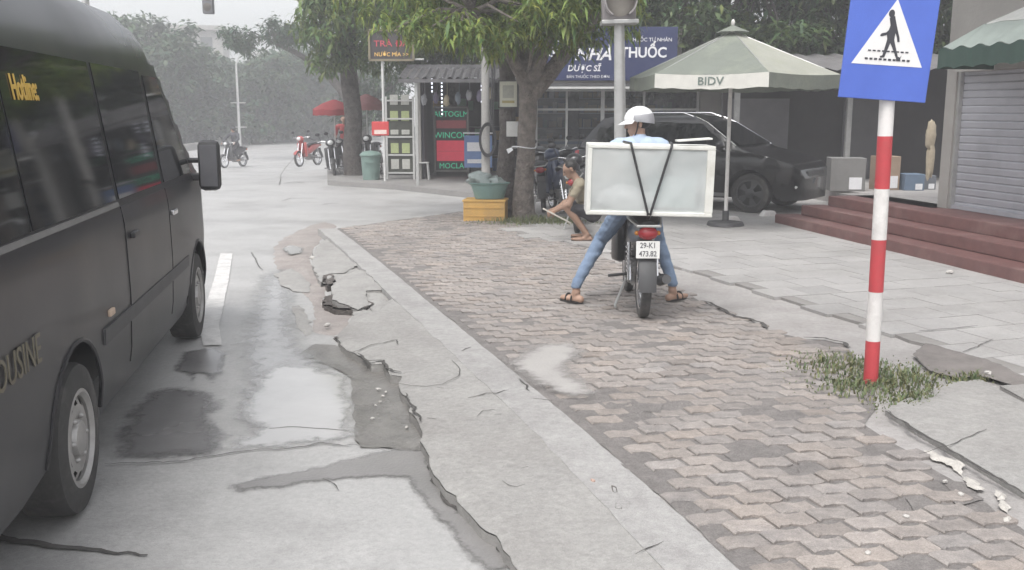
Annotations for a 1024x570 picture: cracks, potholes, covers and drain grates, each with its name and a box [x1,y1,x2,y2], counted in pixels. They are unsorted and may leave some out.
pothole [302,344,422,450]
pothole [322,294,352,316]
crack [354,339,470,421]
